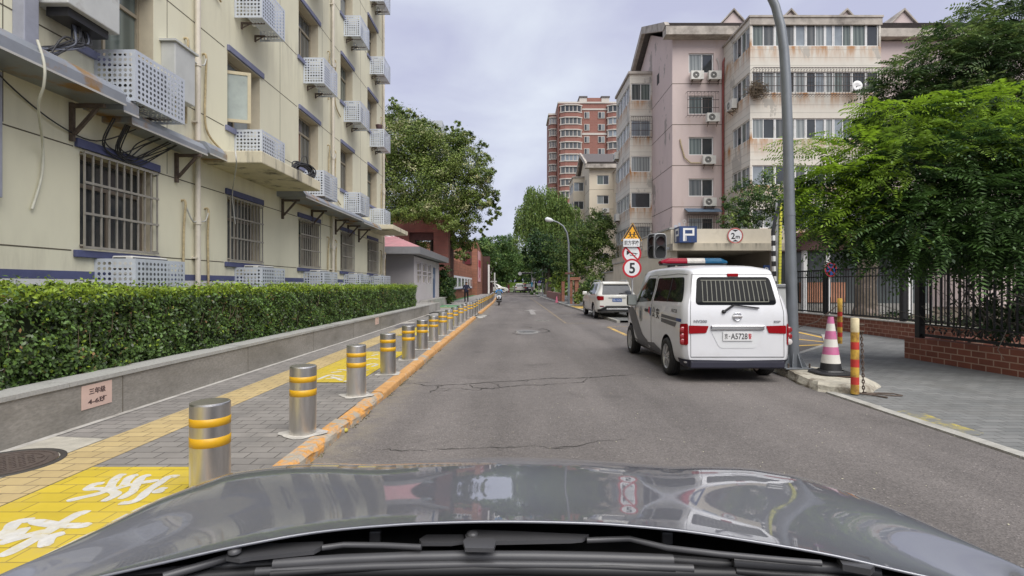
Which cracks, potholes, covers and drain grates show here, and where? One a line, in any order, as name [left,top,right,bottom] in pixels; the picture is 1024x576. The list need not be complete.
crack [382,439,628,451]
crack [414,375,620,393]
manhole cover [0,448,68,478]
